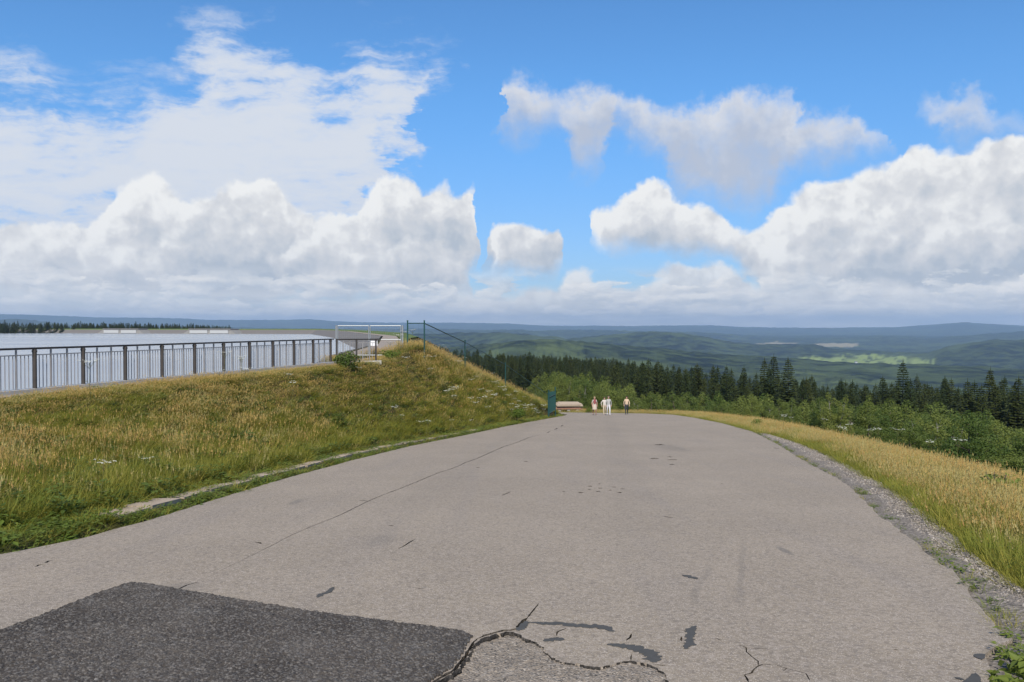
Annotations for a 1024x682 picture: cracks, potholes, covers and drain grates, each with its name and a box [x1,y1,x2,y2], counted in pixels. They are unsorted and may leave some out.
crack [434,603,539,682]
pothole [437,631,669,682]
